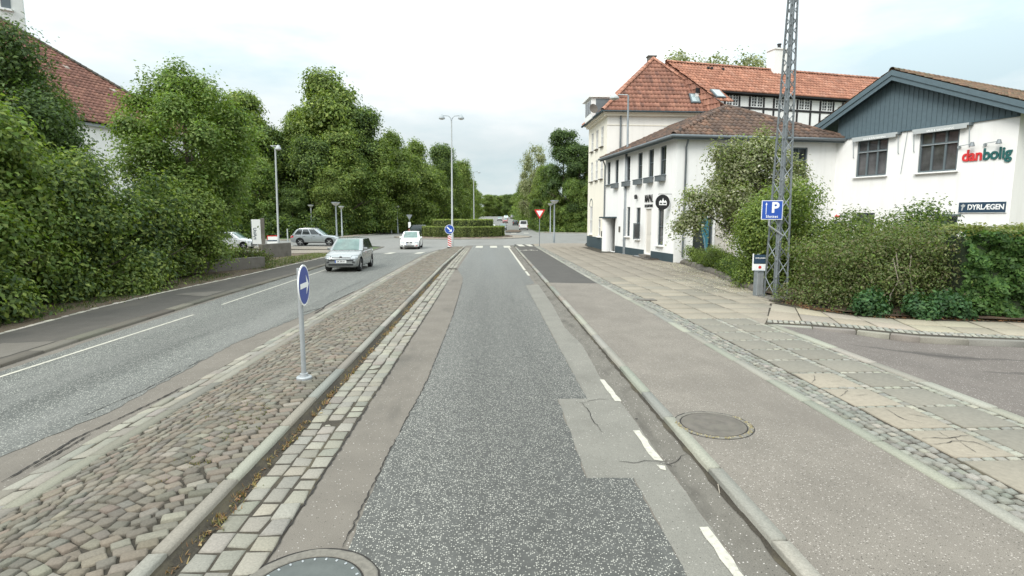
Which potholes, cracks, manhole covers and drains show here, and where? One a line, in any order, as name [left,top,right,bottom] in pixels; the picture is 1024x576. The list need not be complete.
crack [890,411,991,451]
manhole cover [675,411,755,440]
manhole cover [248,548,380,576]
